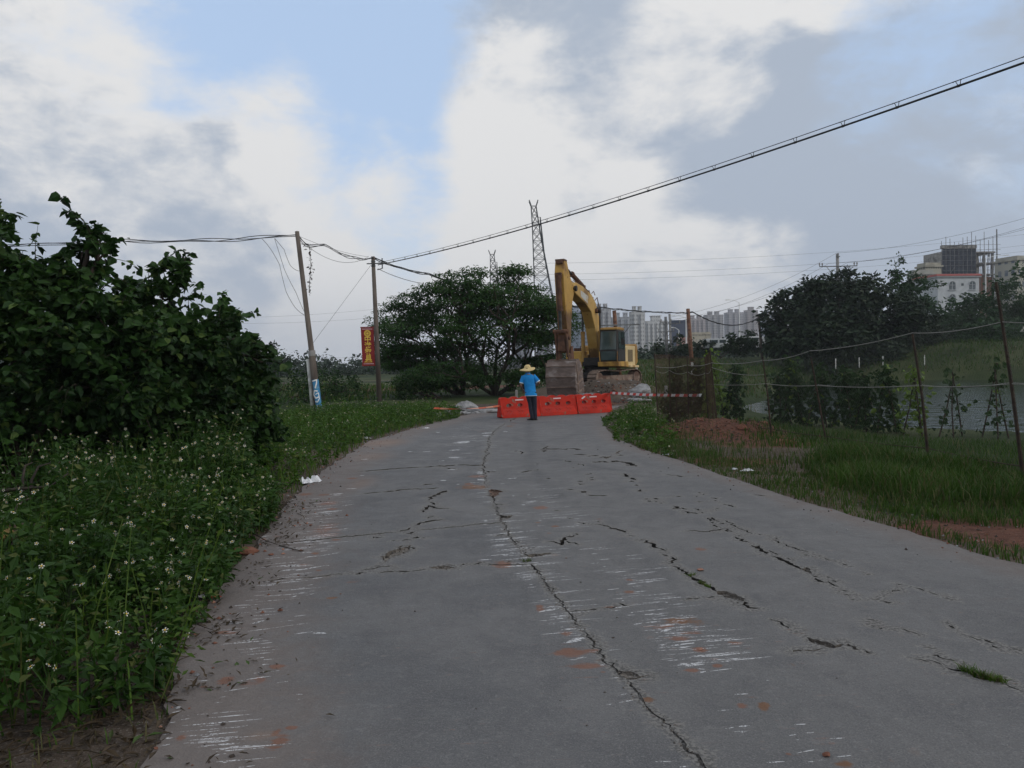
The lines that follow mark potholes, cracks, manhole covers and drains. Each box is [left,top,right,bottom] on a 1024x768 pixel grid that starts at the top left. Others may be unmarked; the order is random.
crack [367,465,490,541]
pothole [381,545,415,562]
crack [272,561,521,581]
crack [868,619,1021,691]
crack [520,446,854,600]
crack [548,510,789,628]
